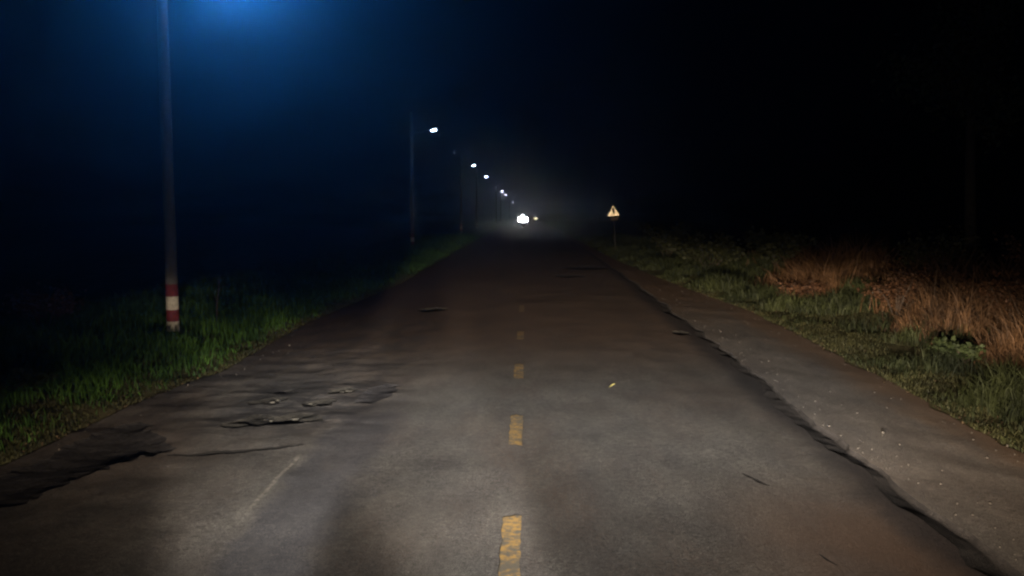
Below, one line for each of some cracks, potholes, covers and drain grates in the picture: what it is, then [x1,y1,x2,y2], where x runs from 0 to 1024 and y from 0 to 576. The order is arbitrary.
pothole [246,396,291,406]
pothole [219,412,324,428]
pothole [302,399,337,407]
crack [167,444,304,457]
pothole [354,383,400,403]
crack [742,473,770,486]
